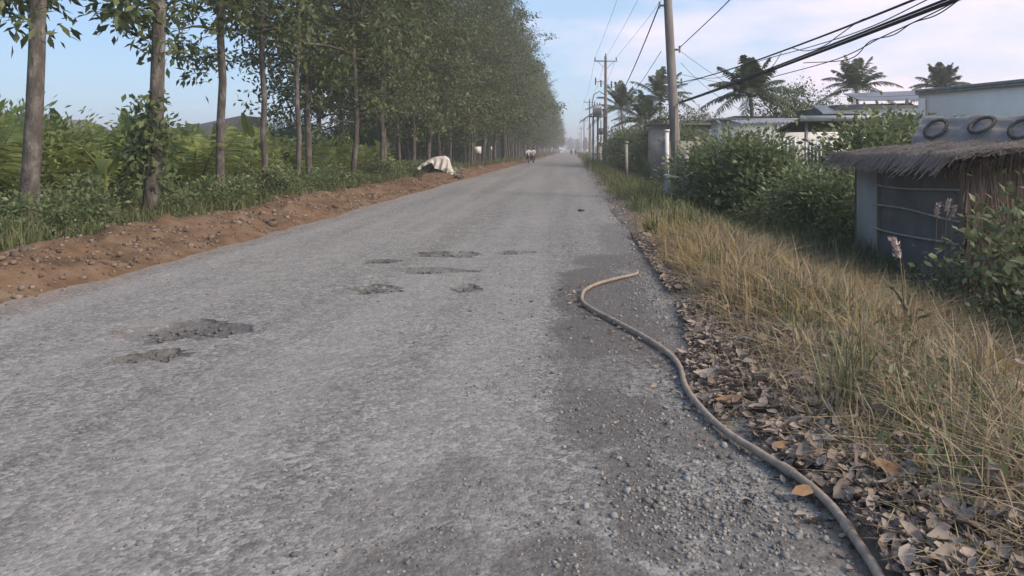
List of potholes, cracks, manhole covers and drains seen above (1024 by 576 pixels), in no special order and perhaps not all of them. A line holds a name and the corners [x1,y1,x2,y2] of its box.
pothole [446,284,483,293]
pothole [110,348,197,364]
pothole [345,284,404,295]
pothole [108,318,255,346]
